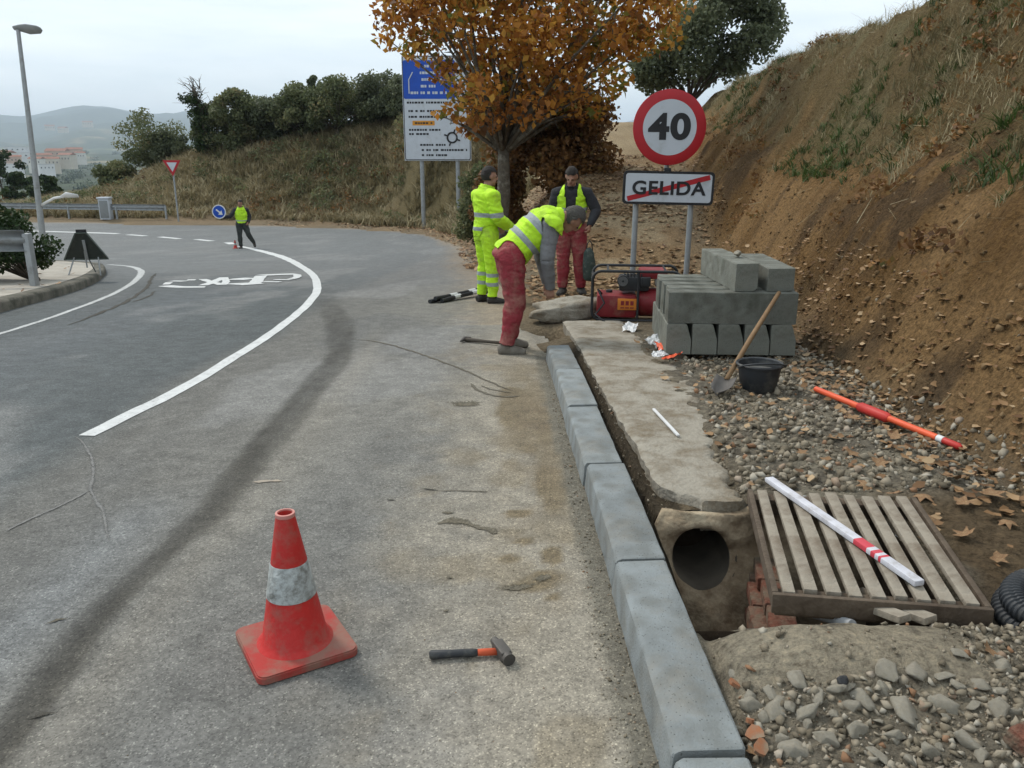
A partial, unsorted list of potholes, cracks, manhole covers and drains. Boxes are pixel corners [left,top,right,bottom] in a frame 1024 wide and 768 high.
crack [357,339,515,397]
